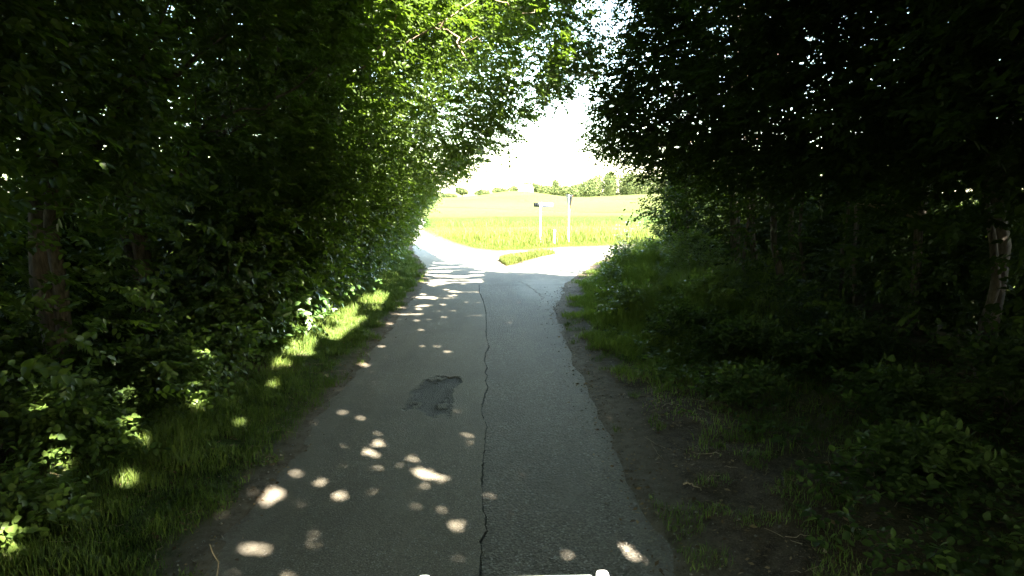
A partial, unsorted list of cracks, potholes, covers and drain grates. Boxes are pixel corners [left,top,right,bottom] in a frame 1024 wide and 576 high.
crack [479,285,490,576]
pothole [401,375,463,419]
